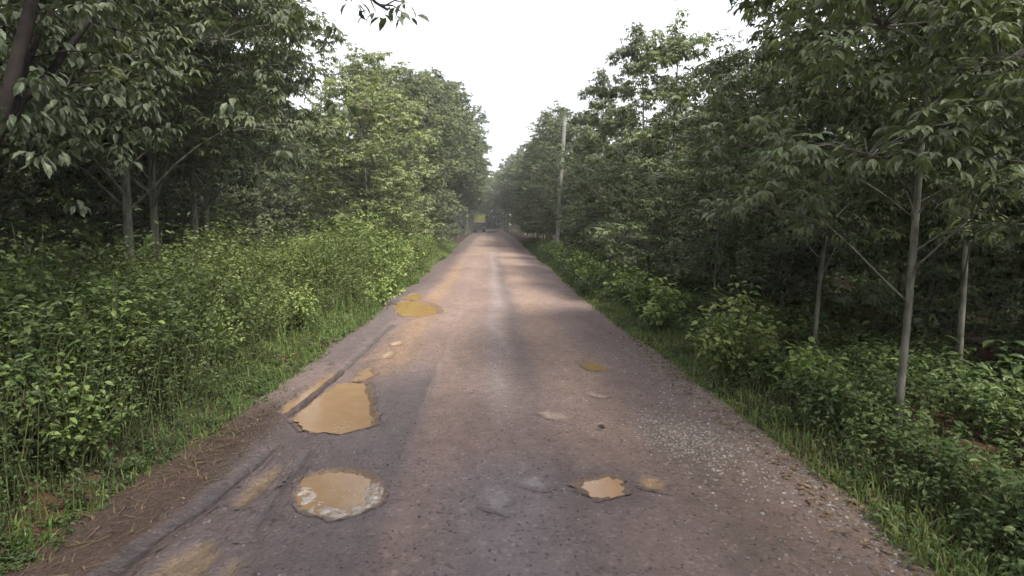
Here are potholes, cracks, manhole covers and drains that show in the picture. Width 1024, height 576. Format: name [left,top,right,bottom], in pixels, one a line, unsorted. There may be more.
pothole [401,292,424,300]
pothole [287,465,390,522]
pothole [349,367,379,383]
pothole [629,471,677,495]
pothole [567,473,632,502]
pothole [286,379,382,435]
pothole [392,300,445,317]
pothole [576,358,613,371]
